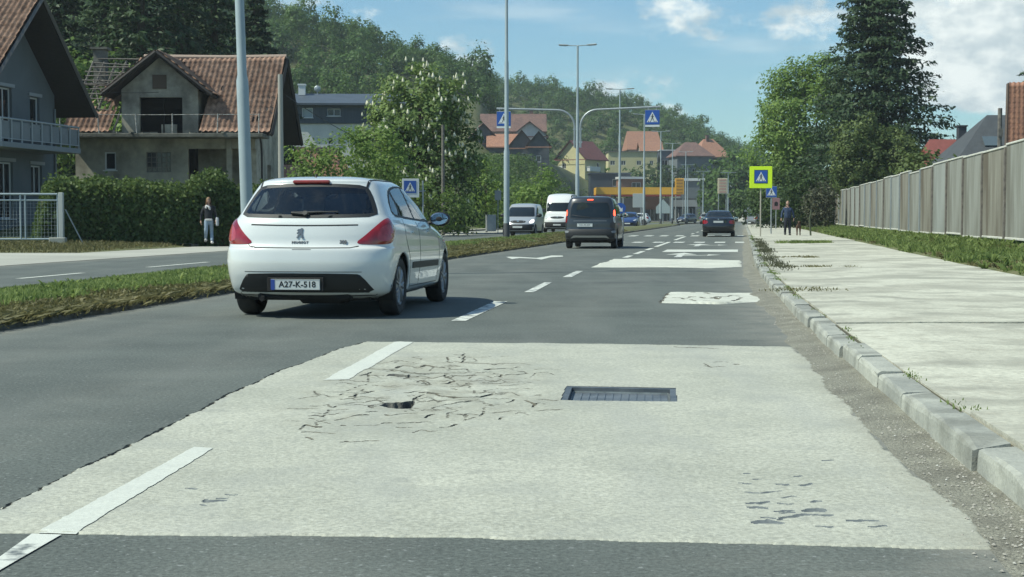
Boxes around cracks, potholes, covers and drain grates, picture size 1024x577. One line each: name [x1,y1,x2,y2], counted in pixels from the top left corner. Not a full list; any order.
pothole [380,399,415,409]
crack [673,346,739,367]
crack [287,354,560,442]
